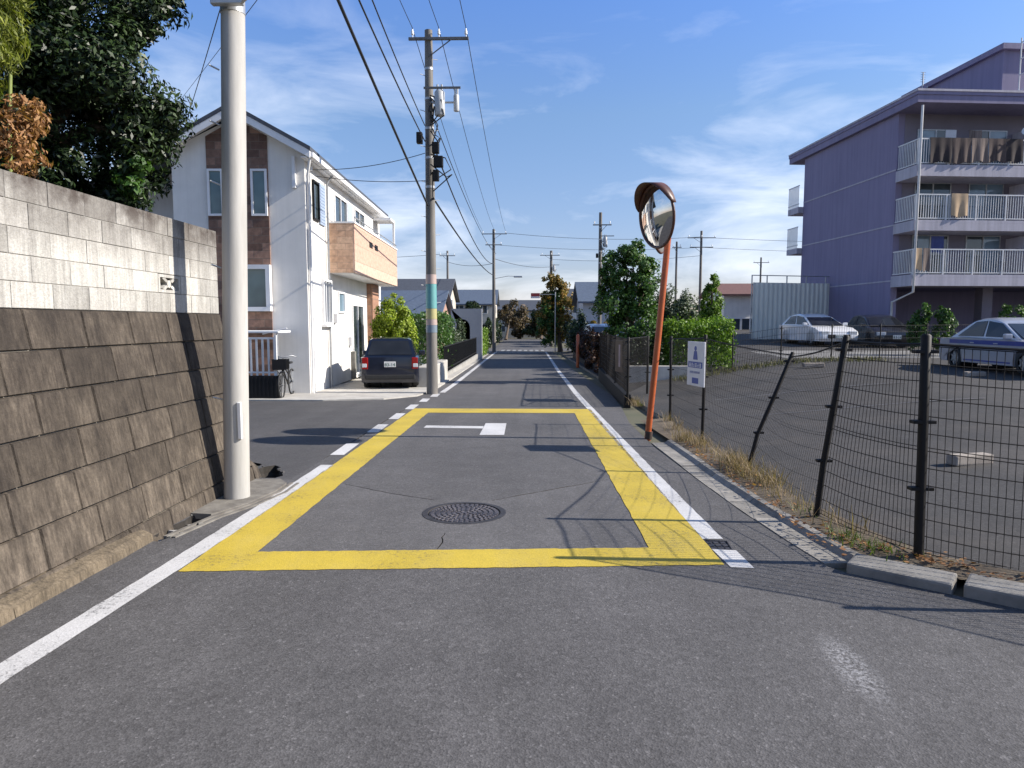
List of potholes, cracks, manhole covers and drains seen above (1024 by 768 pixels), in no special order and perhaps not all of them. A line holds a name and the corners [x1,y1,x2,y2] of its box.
manhole cover [422,502,506,524]
